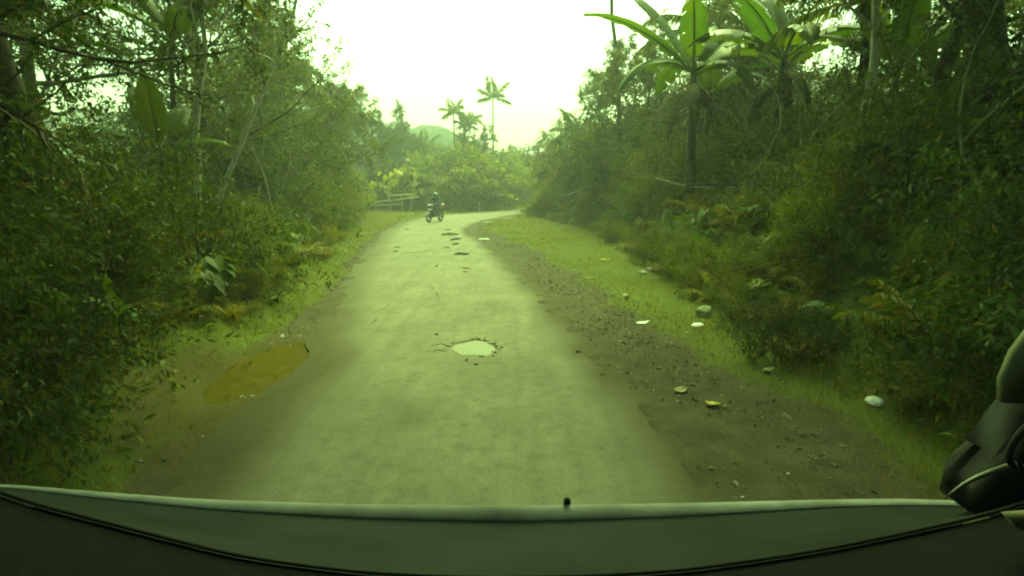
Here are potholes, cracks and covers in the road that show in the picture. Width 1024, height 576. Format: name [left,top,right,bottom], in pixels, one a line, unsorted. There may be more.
pothole [446,337,503,357]
